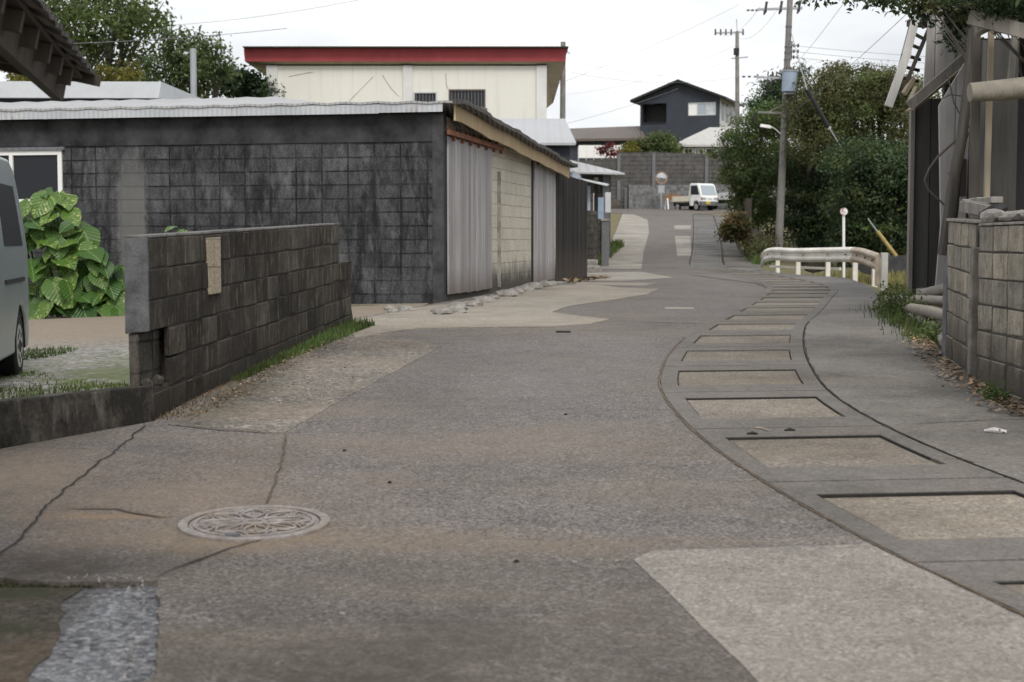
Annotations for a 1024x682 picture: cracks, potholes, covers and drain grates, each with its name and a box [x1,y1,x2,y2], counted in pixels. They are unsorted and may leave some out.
manhole cover [178,505,330,542]
crack [0,424,181,554]
crack [158,540,258,576]
